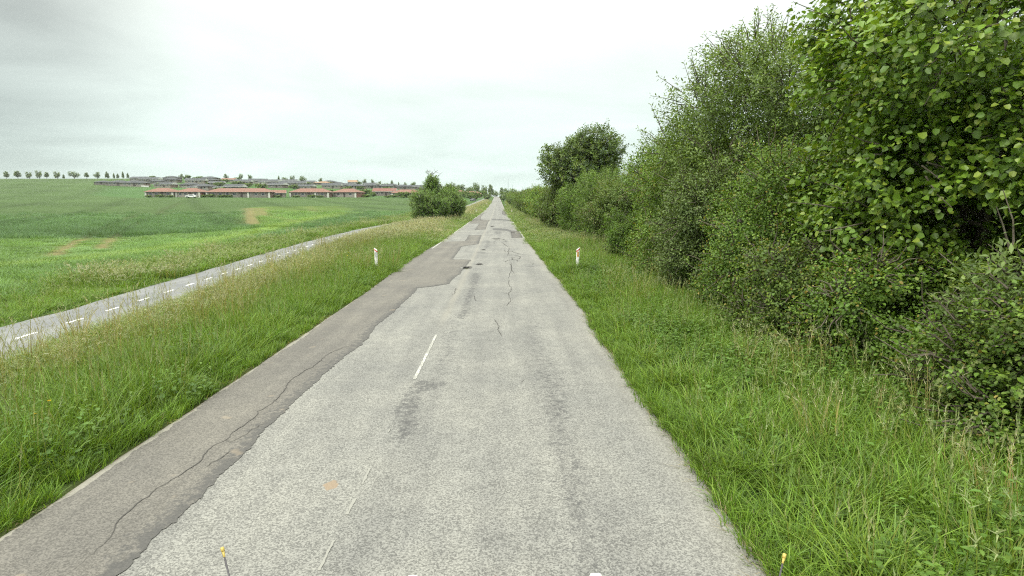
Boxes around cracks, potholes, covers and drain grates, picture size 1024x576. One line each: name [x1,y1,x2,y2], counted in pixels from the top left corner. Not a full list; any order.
crack [494,240,534,336]
crack [71,348,341,571]
